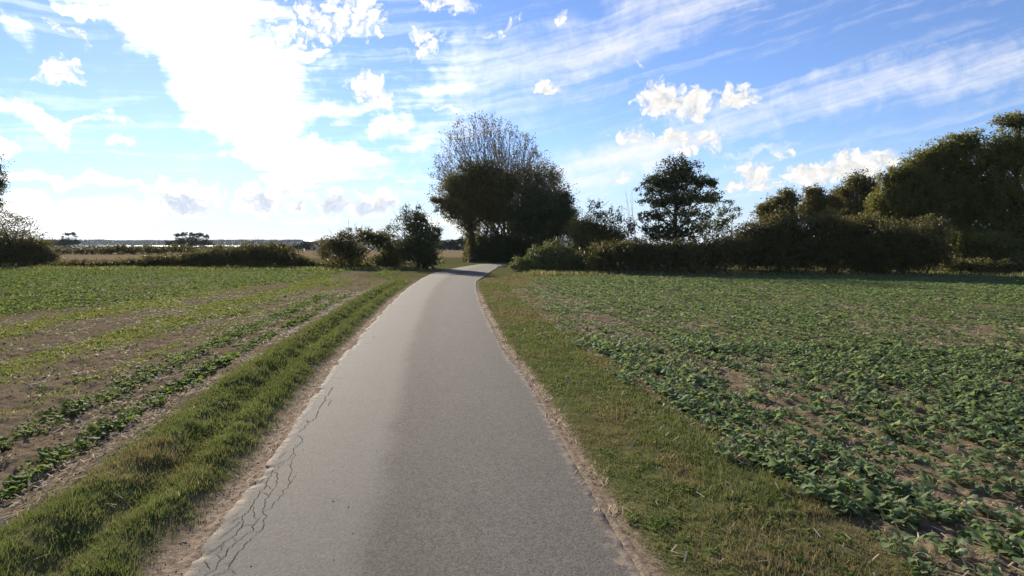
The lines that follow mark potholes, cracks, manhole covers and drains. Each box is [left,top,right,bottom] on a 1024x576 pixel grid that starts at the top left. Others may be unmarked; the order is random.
crack [204,435,303,576]
